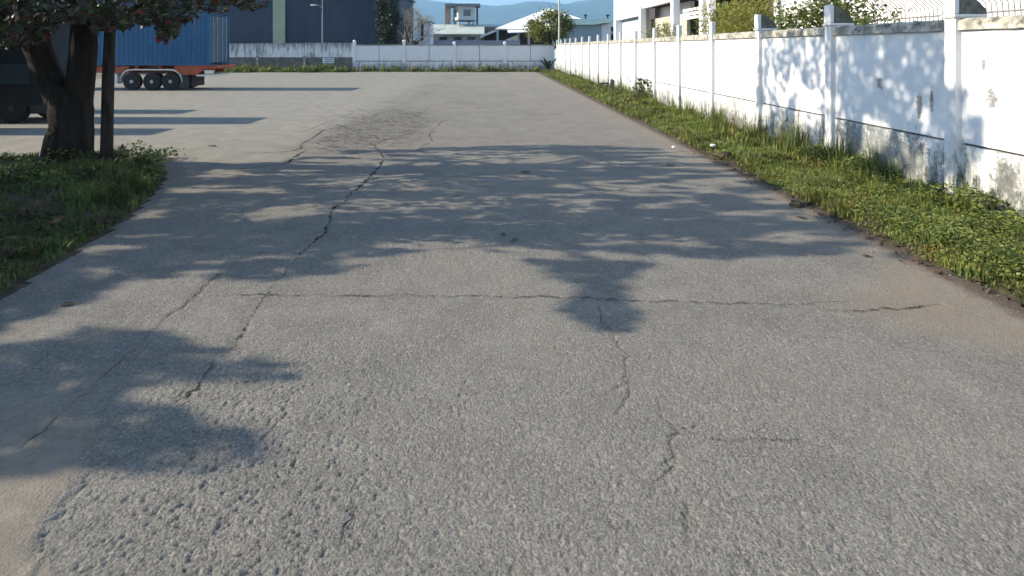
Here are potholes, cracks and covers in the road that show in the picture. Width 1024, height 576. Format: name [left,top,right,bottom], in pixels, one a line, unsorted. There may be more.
crack [239,293,941,312]
crack [217,94,446,173]
crack [22,270,231,447]
crack [598,305,693,537]
